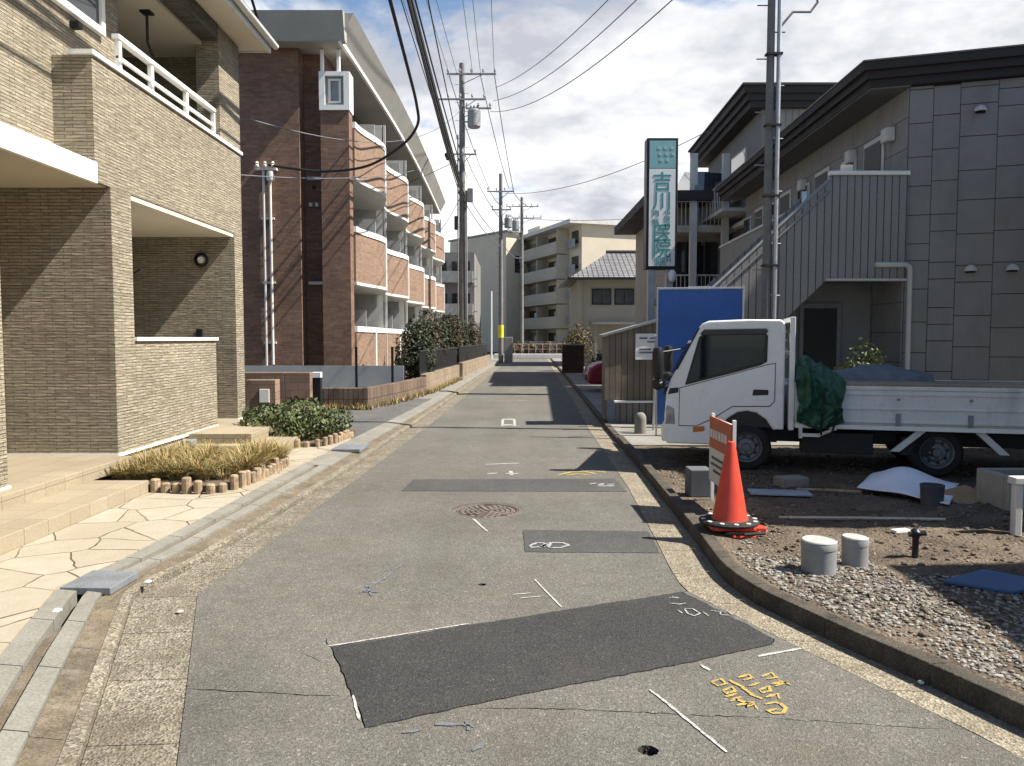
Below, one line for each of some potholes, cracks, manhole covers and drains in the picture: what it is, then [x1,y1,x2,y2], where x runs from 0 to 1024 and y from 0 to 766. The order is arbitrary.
pothole [637,745,659,756]
manhole cover [60,570,138,595]
manhole cover [452,503,523,519]
crack [197,689,940,729]
